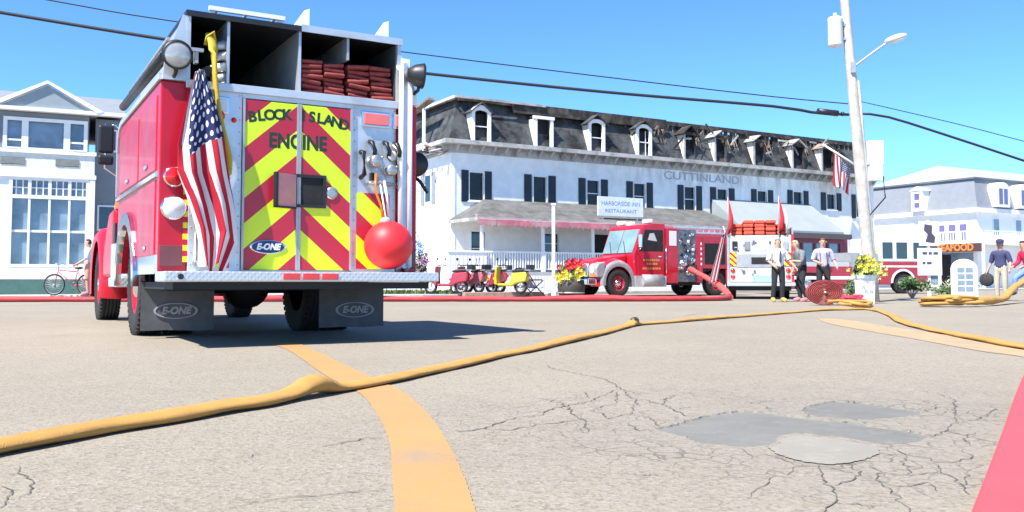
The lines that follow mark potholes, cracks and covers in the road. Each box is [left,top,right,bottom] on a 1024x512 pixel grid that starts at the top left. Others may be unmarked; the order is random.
crack [1,466,34,507]
crack [700,391,997,512]
crack [248,366,691,458]
